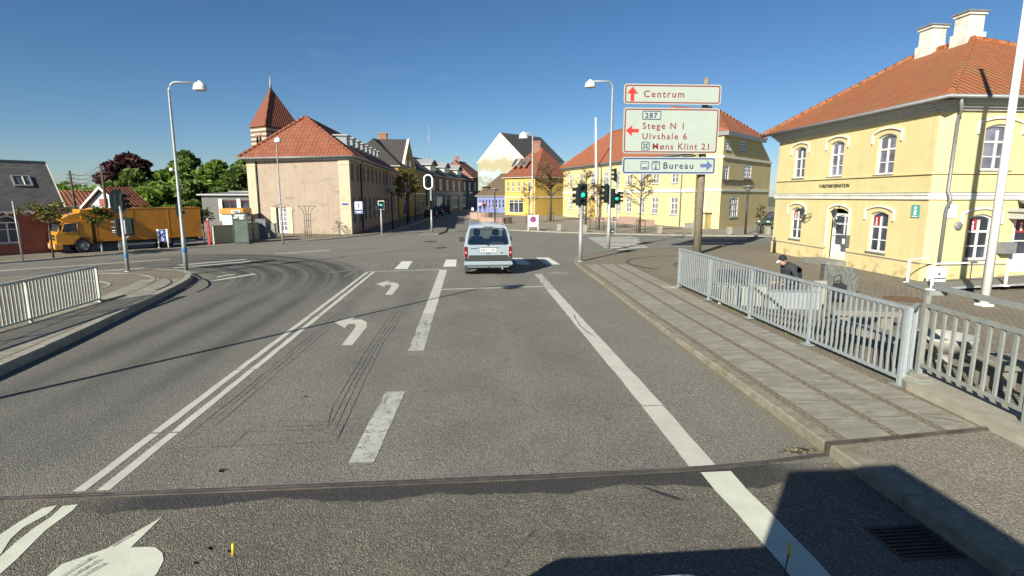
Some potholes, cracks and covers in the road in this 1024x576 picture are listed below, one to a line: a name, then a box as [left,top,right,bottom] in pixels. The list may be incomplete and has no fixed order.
drain grate [862,524,967,561]
